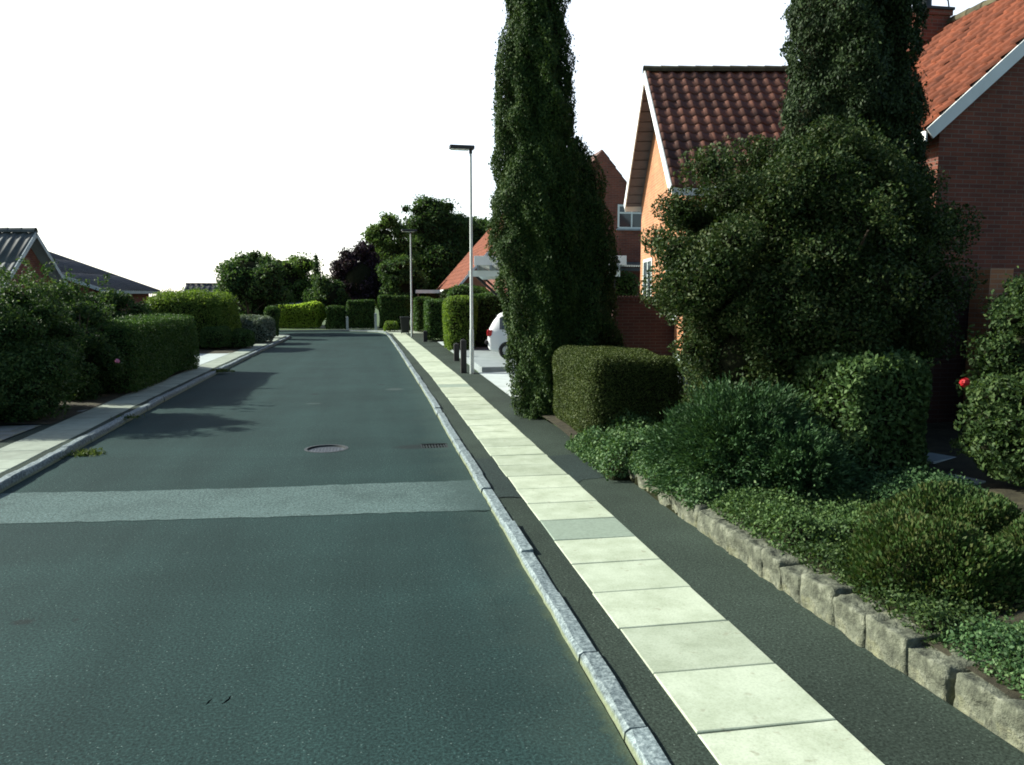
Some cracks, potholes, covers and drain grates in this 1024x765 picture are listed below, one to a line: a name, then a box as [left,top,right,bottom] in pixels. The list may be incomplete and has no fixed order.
manhole cover [304,444,348,453]
